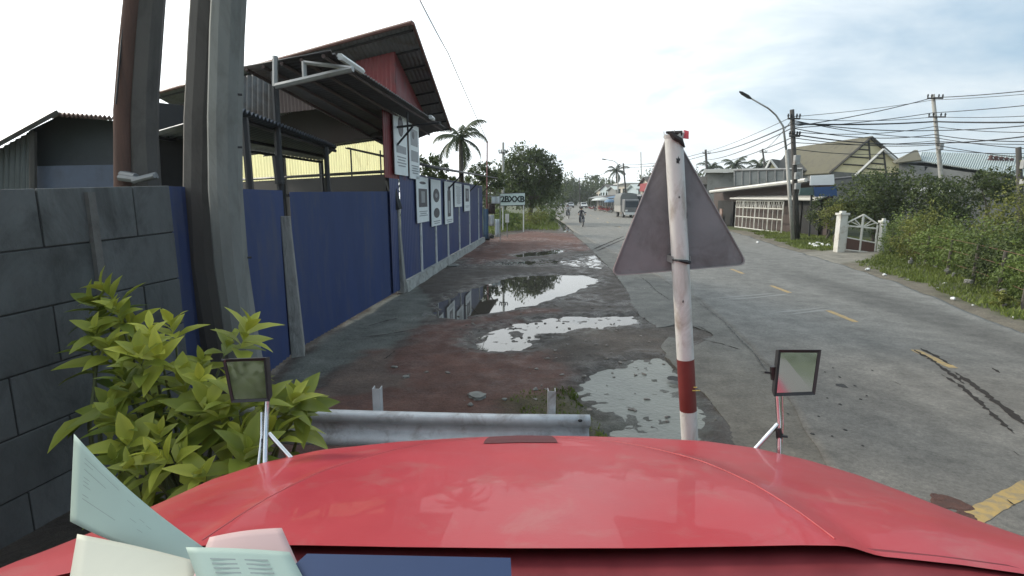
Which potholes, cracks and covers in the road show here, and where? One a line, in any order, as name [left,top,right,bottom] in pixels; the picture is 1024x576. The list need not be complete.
pothole [455,310,649,354]
pothole [507,248,571,257]
pothole [560,350,730,444]
pothole [422,272,609,321]
pothole [489,253,608,269]
